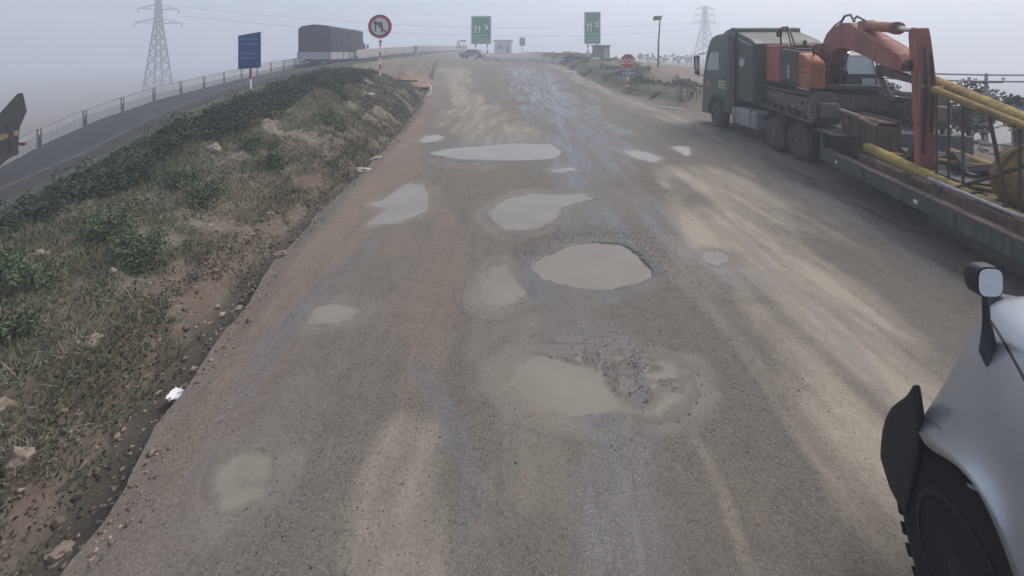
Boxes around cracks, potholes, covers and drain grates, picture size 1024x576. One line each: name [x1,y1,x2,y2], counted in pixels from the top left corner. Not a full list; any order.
pothole [519,236,669,300]
pothole [419,141,572,163]
pothole [469,188,612,242]
pothole [179,426,303,546]
pothole [470,335,721,443]
pothole [460,253,543,323]
pothole [283,293,381,337]
pothole [358,180,443,230]
pothole [664,144,700,158]
pothole [406,133,452,145]
pothole [613,148,671,165]
